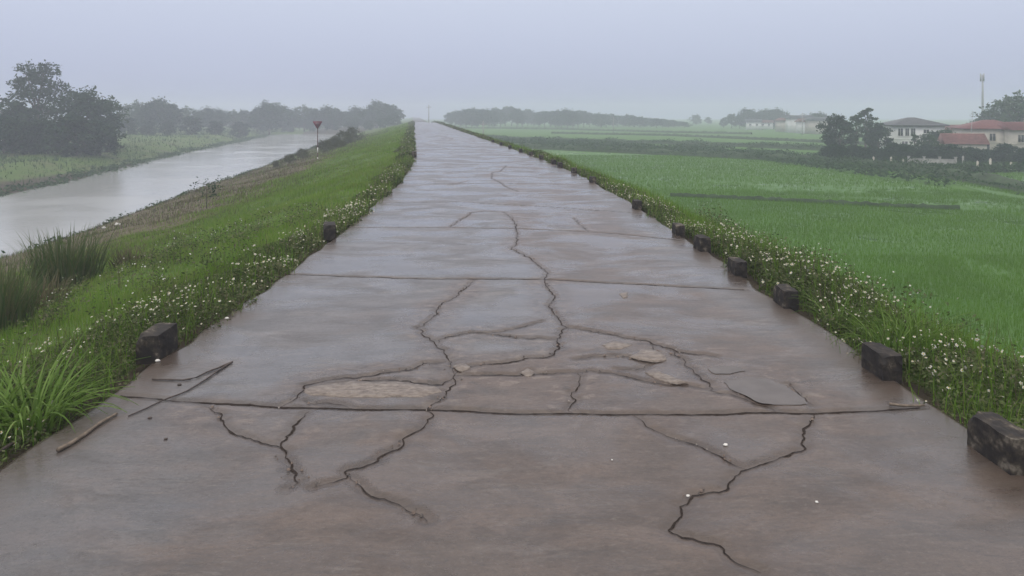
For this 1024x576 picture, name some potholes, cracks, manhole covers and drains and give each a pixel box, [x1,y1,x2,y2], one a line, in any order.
crack [635,385,815,573]
crack [208,211,581,521]
crack [569,327,770,408]
